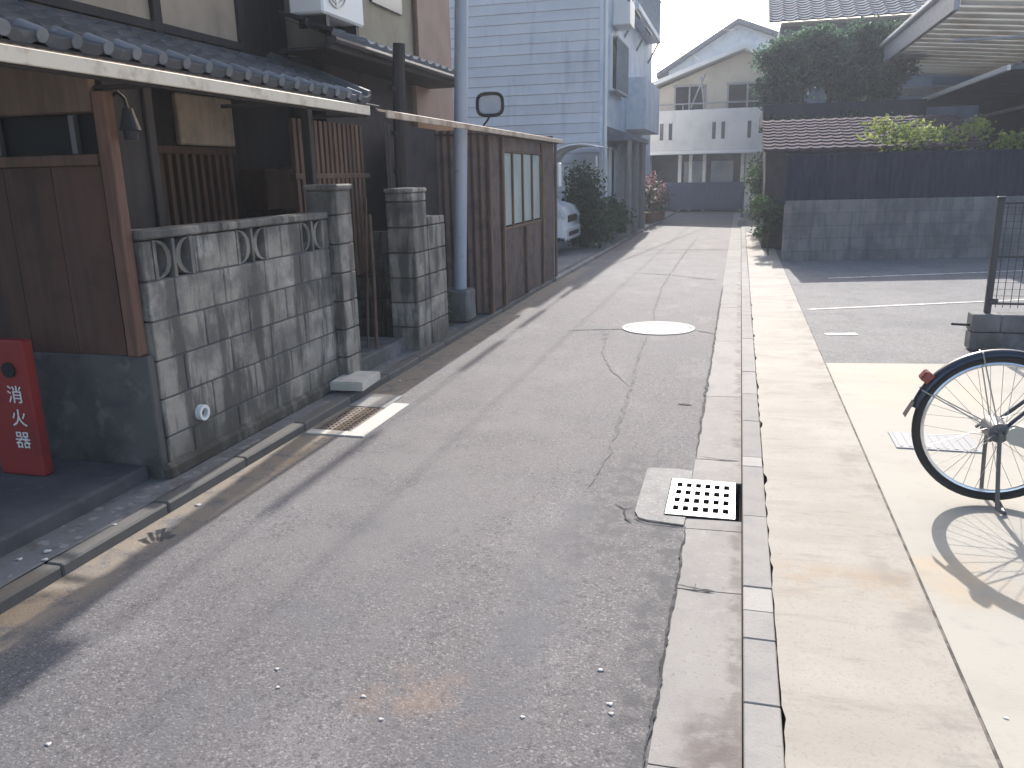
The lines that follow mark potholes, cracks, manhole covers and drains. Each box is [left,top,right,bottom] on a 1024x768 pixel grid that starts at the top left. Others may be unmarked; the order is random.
drain grate [305,394,409,438]
drain grate [635,467,740,526]
crack [581,238,736,486]
manhole cover [622,321,695,335]
